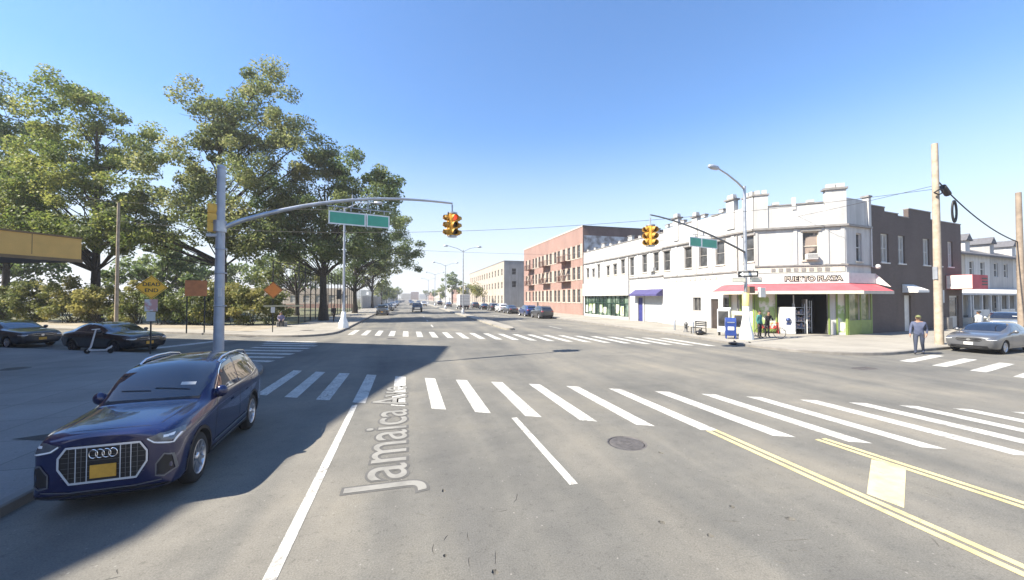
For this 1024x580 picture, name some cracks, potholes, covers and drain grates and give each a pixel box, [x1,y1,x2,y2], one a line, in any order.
manhole cover [607,436,647,451]
